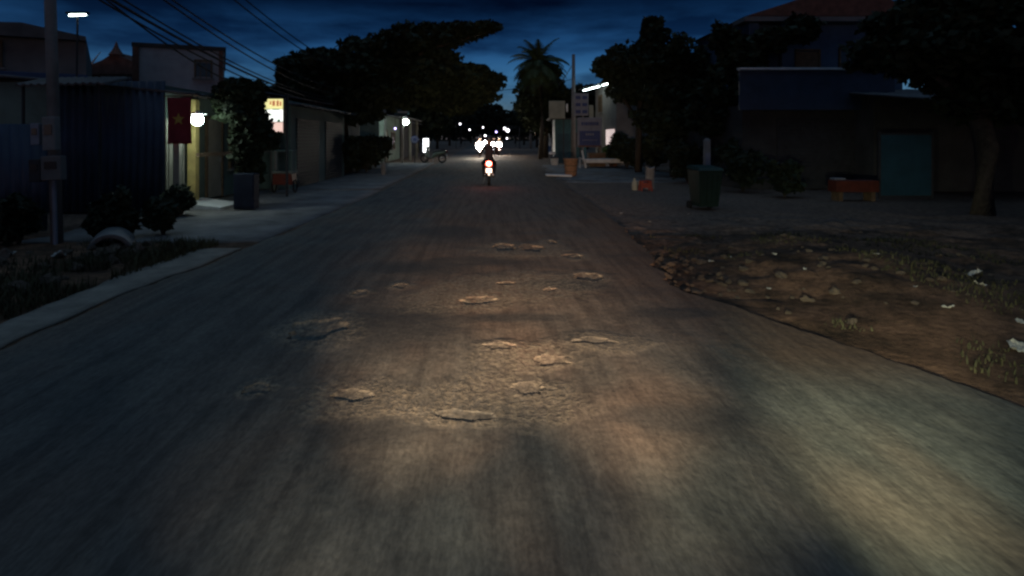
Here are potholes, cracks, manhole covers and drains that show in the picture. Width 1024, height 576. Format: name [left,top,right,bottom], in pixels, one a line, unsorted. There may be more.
pothole [573,273,603,281]
pothole [492,243,516,251]
pothole [533,354,574,366]
pothole [241,382,271,396]
pothole [329,388,376,402]
pothole [433,408,498,422]
pothole [458,296,499,305]
pothole [508,380,546,395]
pothole [481,341,518,350]
pothole [569,336,620,344]
pothole [520,244,546,252]
pothole [287,317,350,341]
